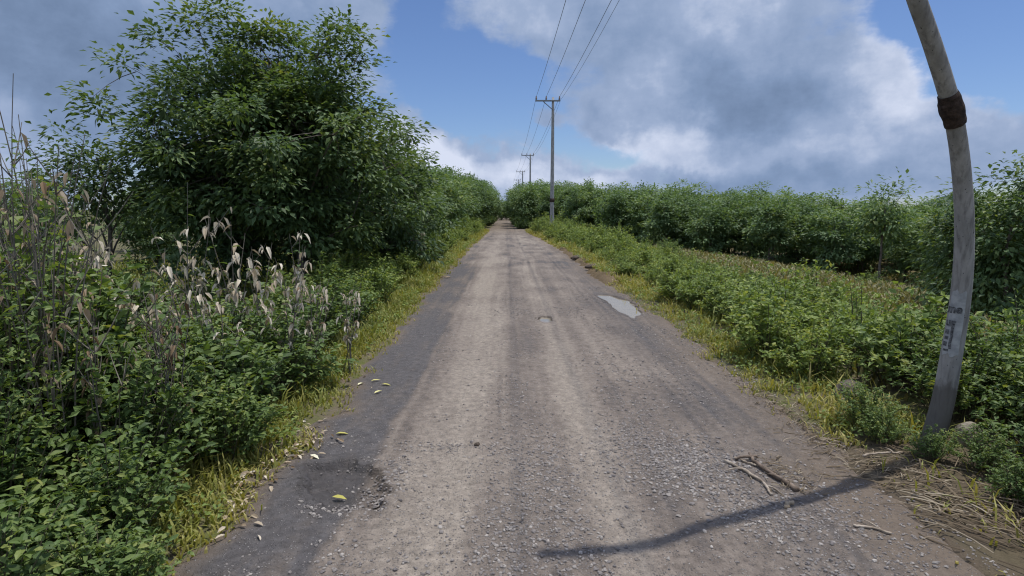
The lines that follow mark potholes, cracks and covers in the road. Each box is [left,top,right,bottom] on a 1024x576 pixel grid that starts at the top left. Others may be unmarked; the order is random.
pothole [535,315,556,324]
pothole [593,292,646,321]
pothole [293,454,408,522]
